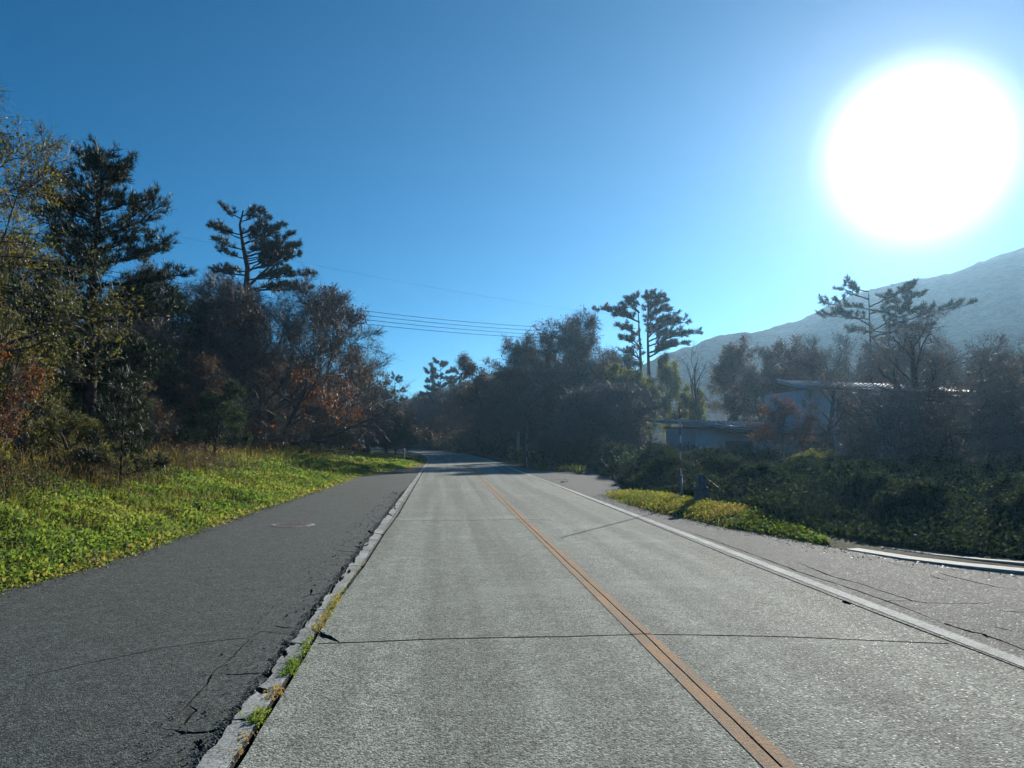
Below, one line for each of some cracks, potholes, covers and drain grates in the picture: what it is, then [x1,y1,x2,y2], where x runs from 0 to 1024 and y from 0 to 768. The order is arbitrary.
crack [27,470,1024,768]
